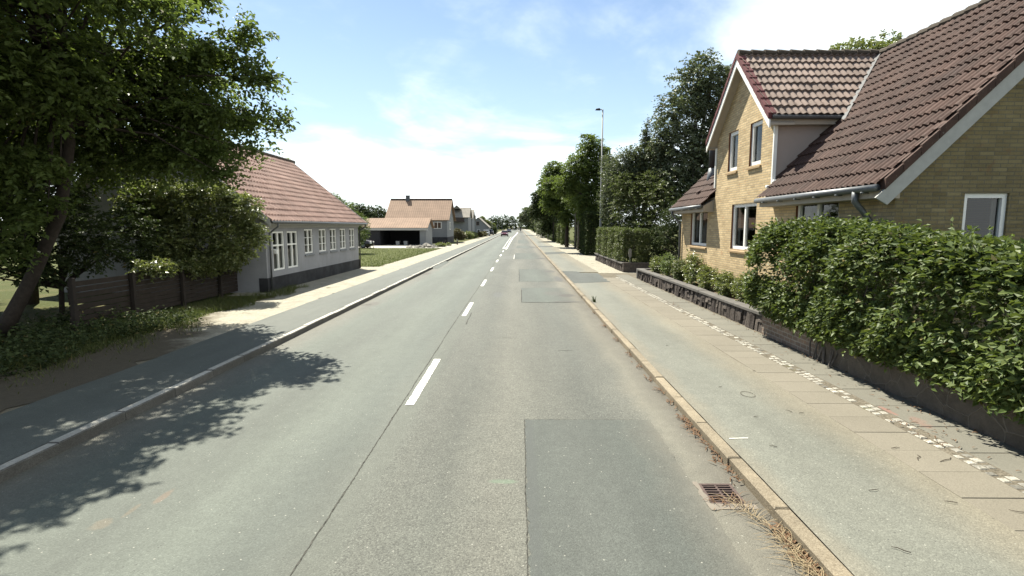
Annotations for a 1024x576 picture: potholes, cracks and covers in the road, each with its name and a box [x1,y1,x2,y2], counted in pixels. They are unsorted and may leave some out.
drain grate [698,483,747,504]
